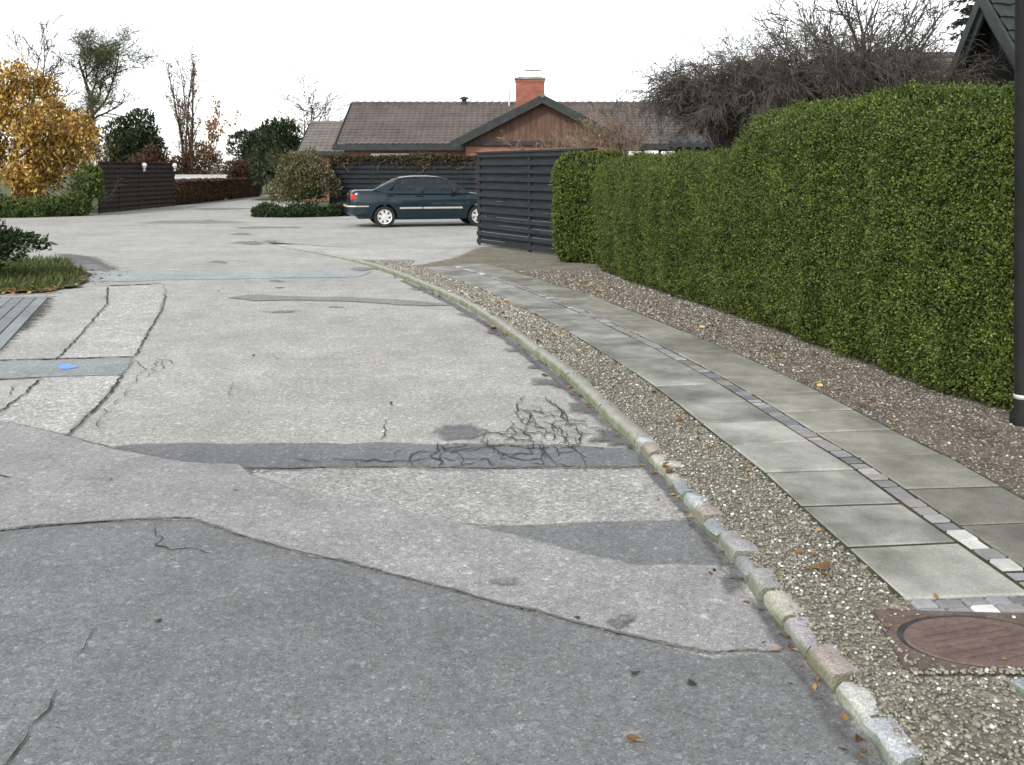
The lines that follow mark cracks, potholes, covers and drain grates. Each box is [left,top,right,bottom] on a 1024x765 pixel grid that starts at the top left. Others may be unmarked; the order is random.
crack [294,396,607,467]
crack [96,359,173,428]
crack [5,690,57,765]
manhole cover [873,609,1024,677]
crack [154,527,211,553]
